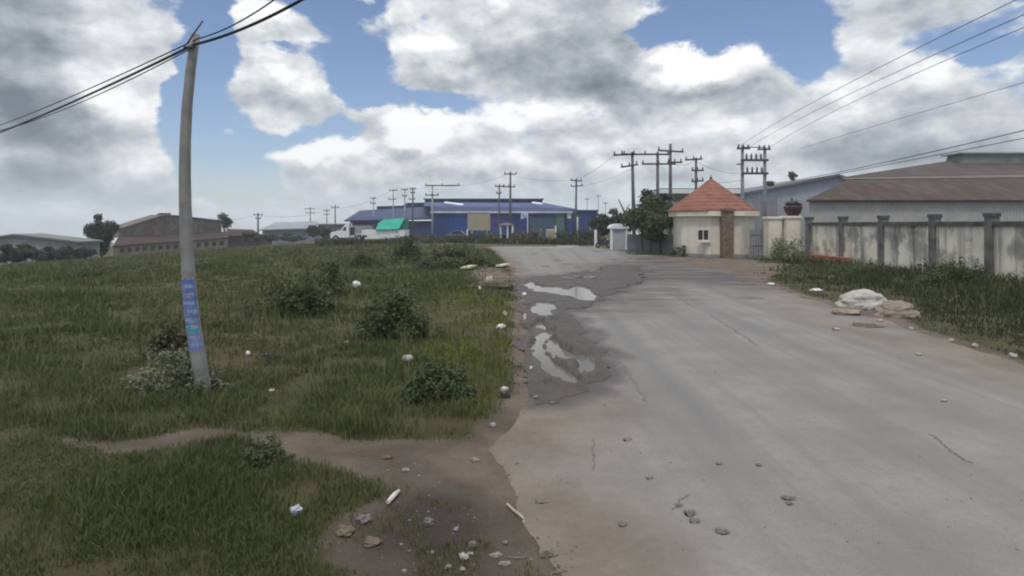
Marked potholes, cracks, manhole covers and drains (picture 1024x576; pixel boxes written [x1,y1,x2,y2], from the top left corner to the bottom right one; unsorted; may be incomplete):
crack [929,434,973,463]
crack [606,349,647,402]
